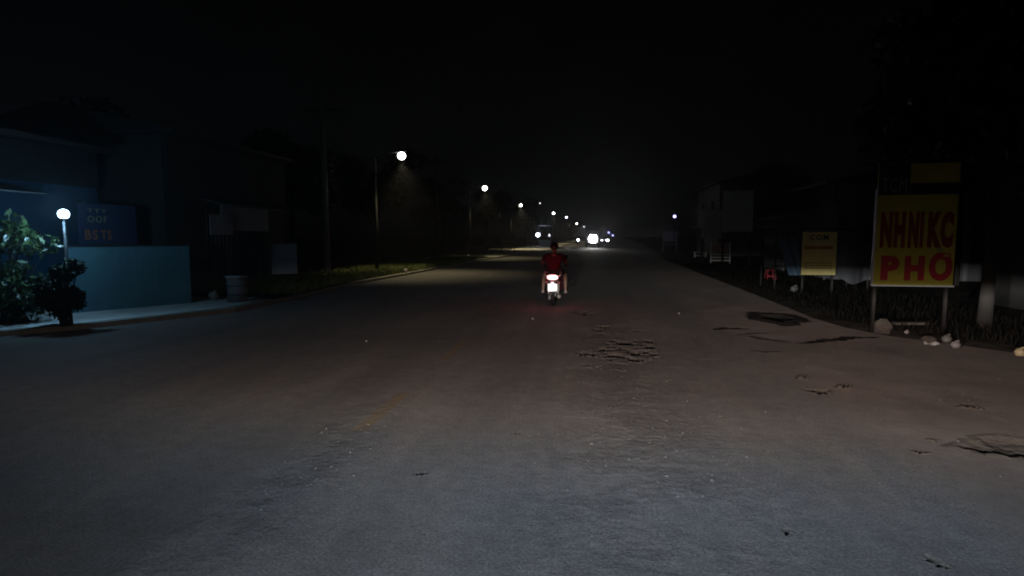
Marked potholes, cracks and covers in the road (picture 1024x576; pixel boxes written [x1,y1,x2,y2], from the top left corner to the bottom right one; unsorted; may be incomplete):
pothole [940,433,1024,461]
pothole [595,338,662,365]
pothole [573,350,600,358]
pothole [745,312,811,326]
pothole [591,323,613,337]
crack [713,327,878,353]
pothole [950,403,984,411]
